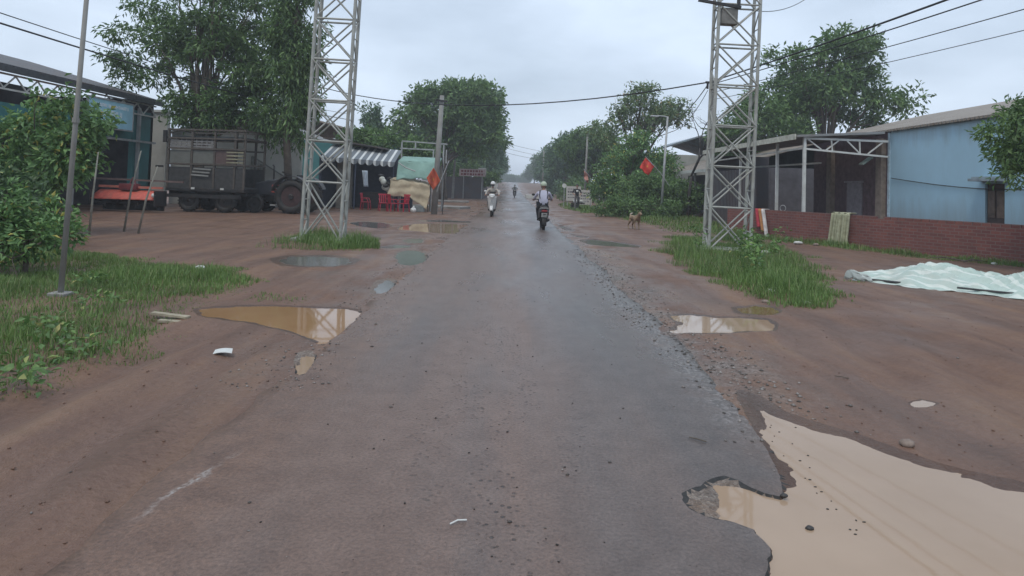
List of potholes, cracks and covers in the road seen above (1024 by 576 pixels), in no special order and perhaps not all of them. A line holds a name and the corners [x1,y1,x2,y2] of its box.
pothole [370,278,397,295]
pothole [666,314,779,334]
pothole [193,305,362,345]
pothole [681,389,1024,576]
pothole [397,223,468,234]
pothole [293,350,317,375]
pothole [393,249,429,266]
